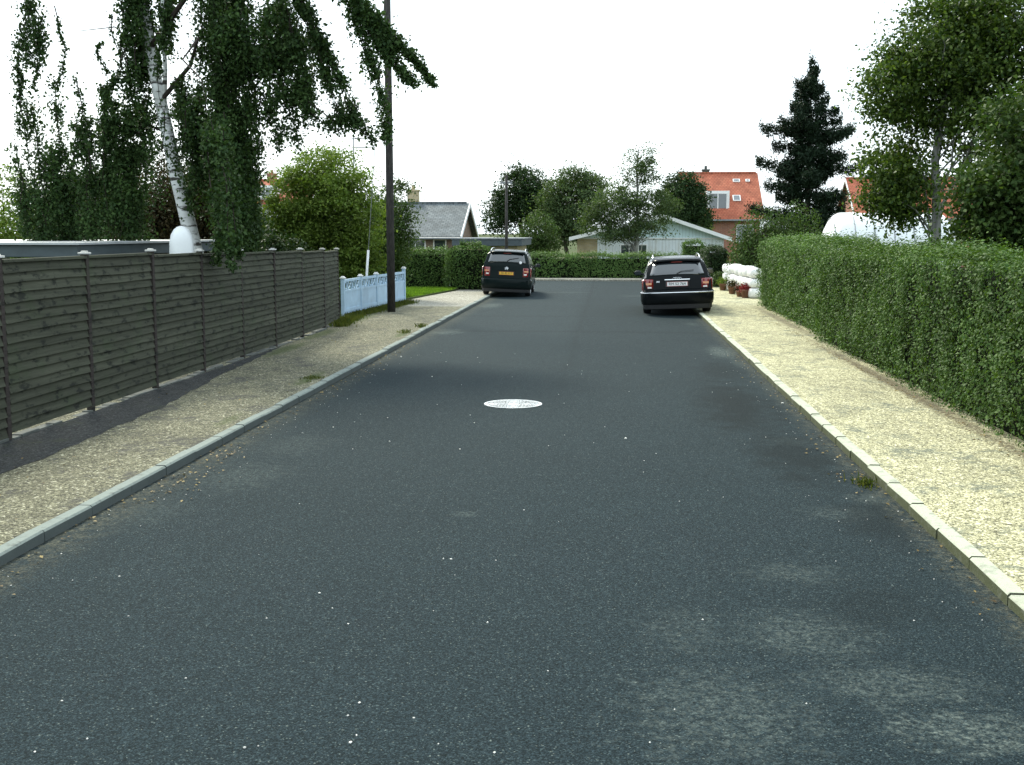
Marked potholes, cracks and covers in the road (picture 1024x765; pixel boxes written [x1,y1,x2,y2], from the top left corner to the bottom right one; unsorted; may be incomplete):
manhole cover [484,399,542,409]
